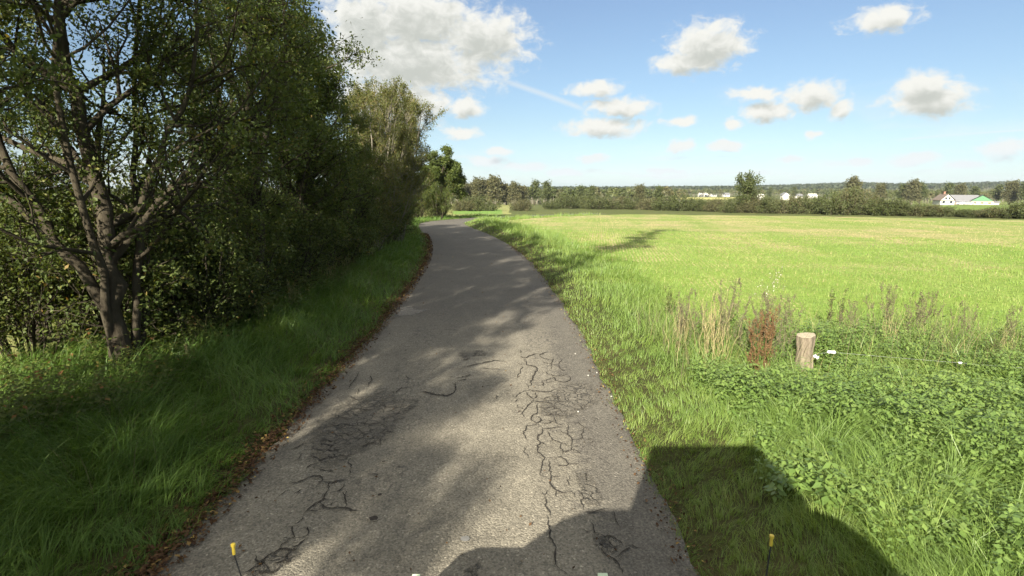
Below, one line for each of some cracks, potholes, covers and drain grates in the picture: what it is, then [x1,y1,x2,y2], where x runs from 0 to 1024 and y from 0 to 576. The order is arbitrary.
crack [515,352,639,574]
crack [243,360,499,573]
